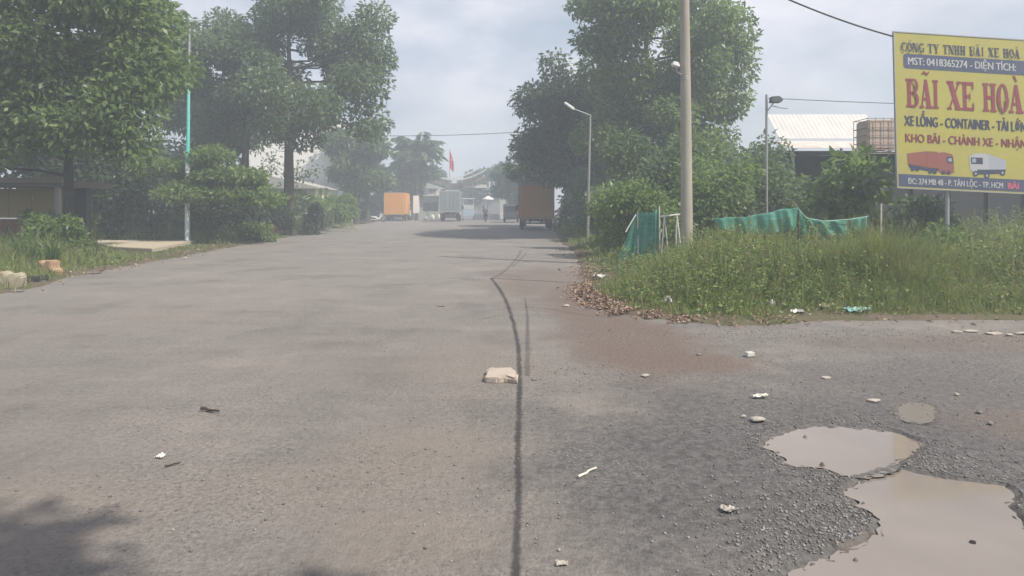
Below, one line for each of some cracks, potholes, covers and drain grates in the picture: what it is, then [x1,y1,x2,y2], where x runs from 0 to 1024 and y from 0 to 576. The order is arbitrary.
pothole [889,401,943,425]
pothole [756,423,931,479]
pothole [759,465,1024,576]
